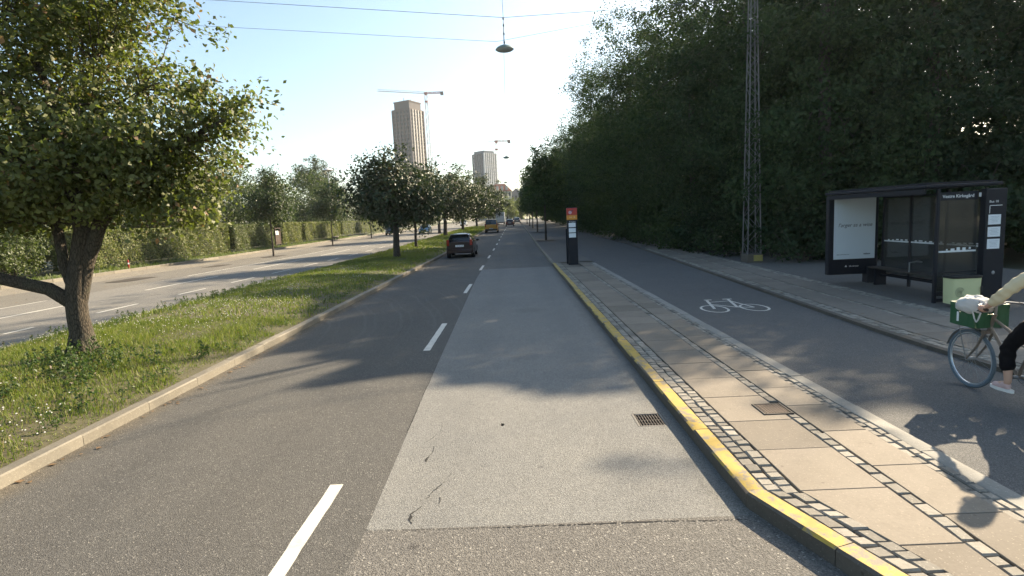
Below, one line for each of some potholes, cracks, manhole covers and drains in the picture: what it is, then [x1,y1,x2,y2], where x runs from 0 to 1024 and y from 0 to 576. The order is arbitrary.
manhole cover [751,403,794,415]
drain grate [631,413,669,427]
